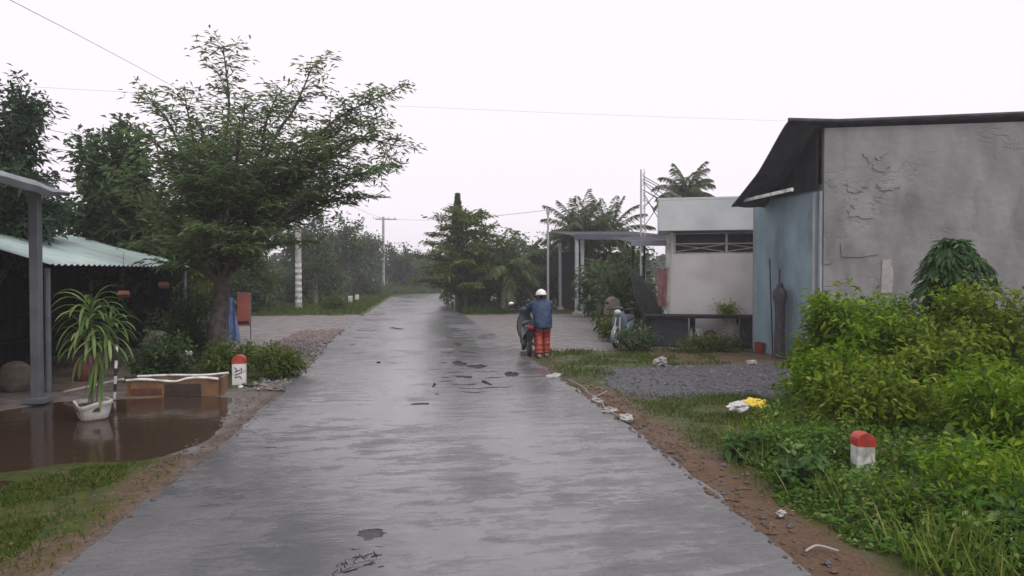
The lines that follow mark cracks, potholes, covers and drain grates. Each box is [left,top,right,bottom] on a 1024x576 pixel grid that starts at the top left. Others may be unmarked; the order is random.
pothole [357,528,386,541]
